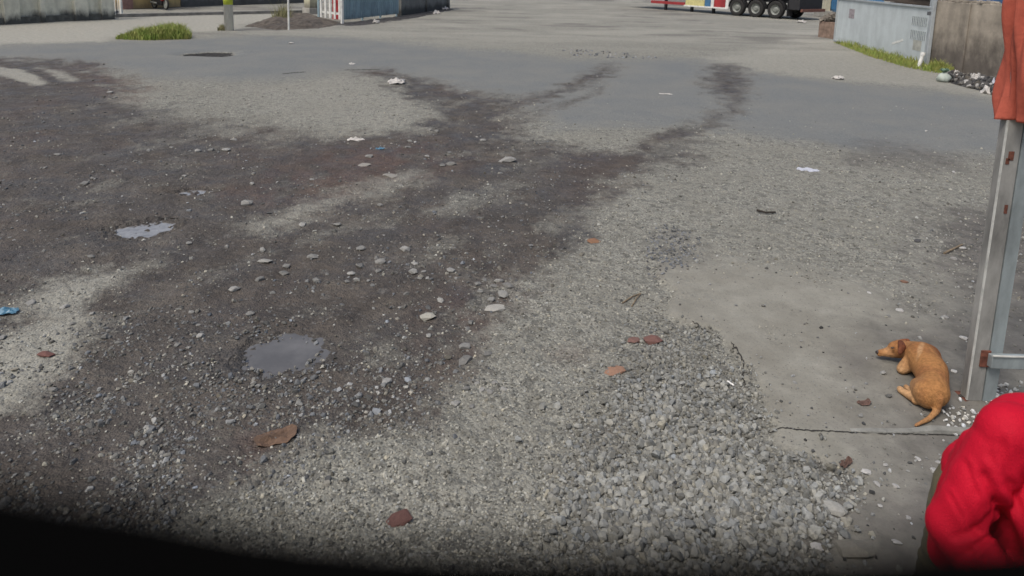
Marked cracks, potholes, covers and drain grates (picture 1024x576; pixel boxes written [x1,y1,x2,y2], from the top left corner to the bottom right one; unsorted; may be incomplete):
pothole [214,326,338,386]
crack [693,321,751,392]
pothole [95,216,193,241]
